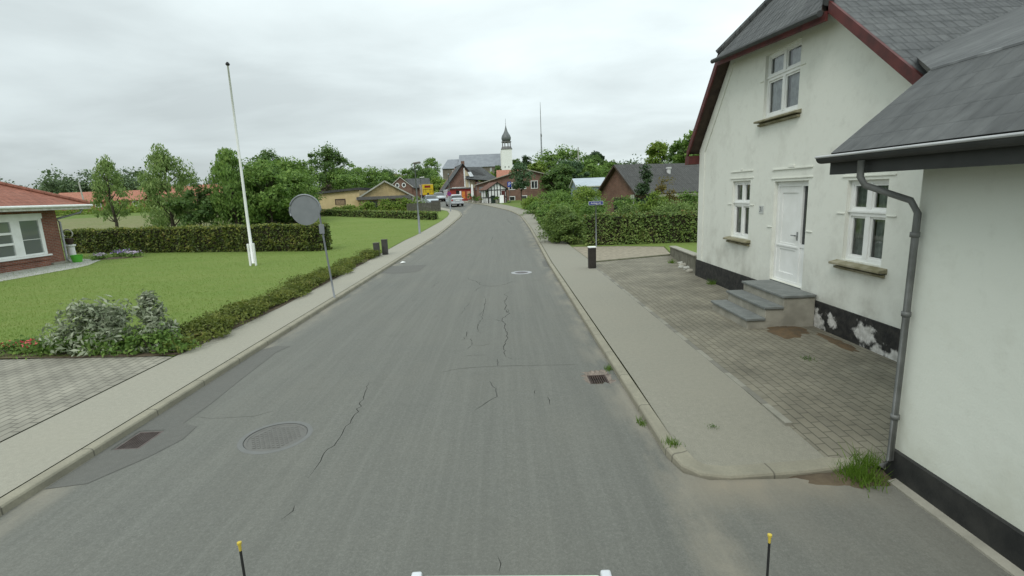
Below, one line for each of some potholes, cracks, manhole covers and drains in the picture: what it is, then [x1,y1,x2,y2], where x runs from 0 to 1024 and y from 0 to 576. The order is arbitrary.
manhole cover [237,421,313,454]
crack [312,384,369,473]
drain grate [581,369,616,384]
crack [445,279,578,409]
drain grate [112,430,165,450]
